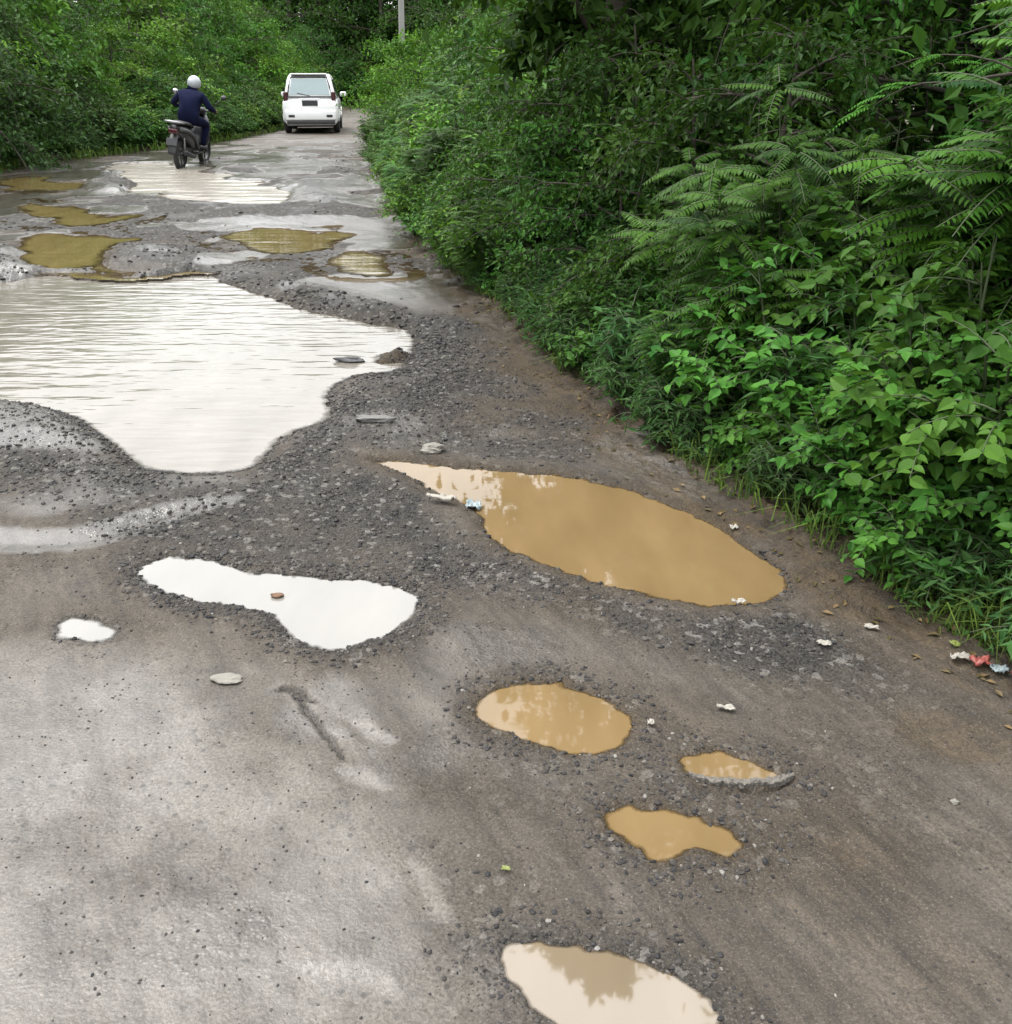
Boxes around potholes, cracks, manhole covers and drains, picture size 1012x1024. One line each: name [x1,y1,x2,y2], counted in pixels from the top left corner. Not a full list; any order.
crack [271,683,353,765]
pothole [0,269,434,478]
pothole [457,671,650,762]
pothole [179,218,394,263]
pothole [92,161,306,204]
pothole [297,245,426,283]
pothole [0,174,132,194]
pothole [483,925,740,1024]
pothole [672,745,787,786]
pothole [589,793,764,874]
pothole [0,198,169,231]
pothole [0,227,232,283]
